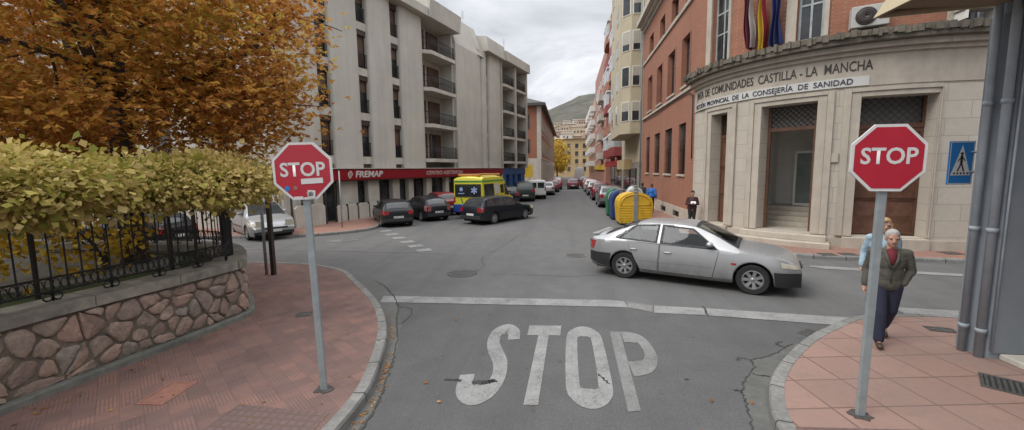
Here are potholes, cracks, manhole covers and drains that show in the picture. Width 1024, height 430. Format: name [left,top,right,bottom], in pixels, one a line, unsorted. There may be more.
crack [359,280,412,430]
utility cover [135,381,198,405]
drain grate [978,372,1024,397]
crack [733,341,793,430]
